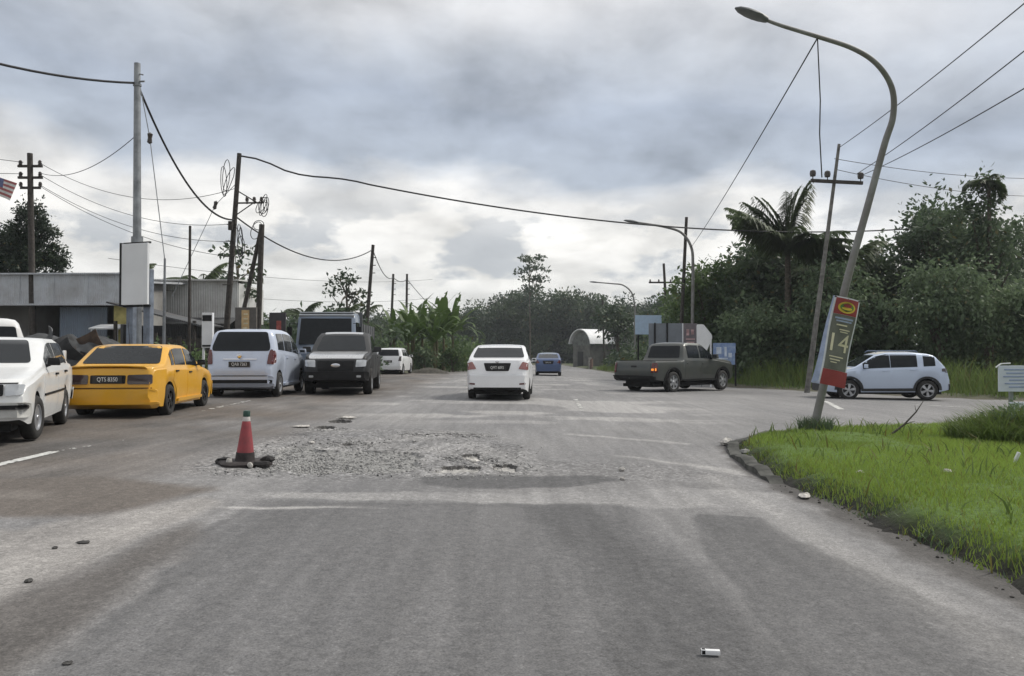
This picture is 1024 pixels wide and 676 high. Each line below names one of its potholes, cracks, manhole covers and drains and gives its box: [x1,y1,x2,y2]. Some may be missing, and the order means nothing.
pothole [456,453,484,466]
pothole [486,463,527,474]
pothole [255,446,428,475]
pothole [428,465,487,475]
